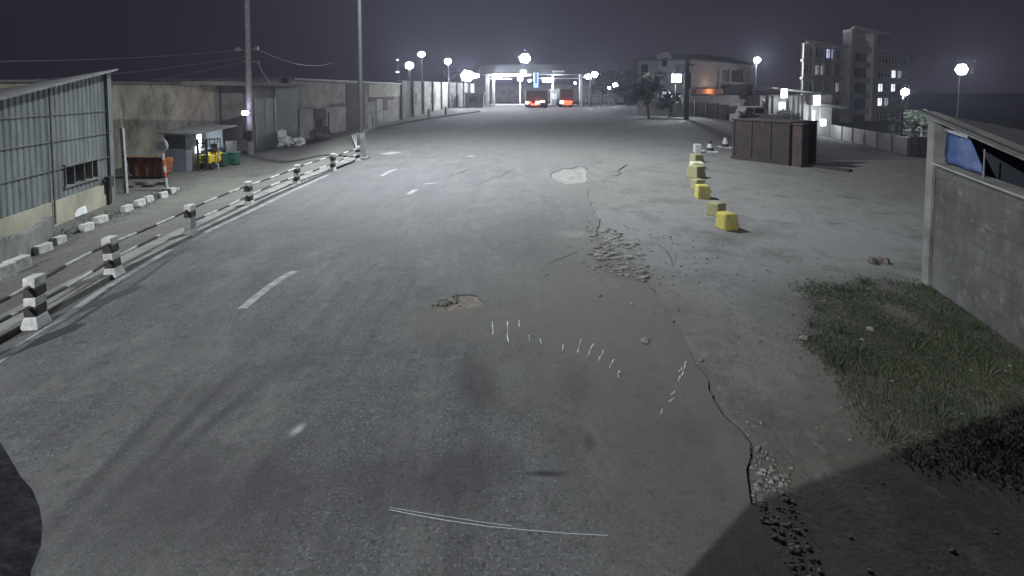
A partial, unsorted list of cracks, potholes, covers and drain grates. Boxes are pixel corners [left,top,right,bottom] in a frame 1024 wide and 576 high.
pothole [431,294,483,312]
